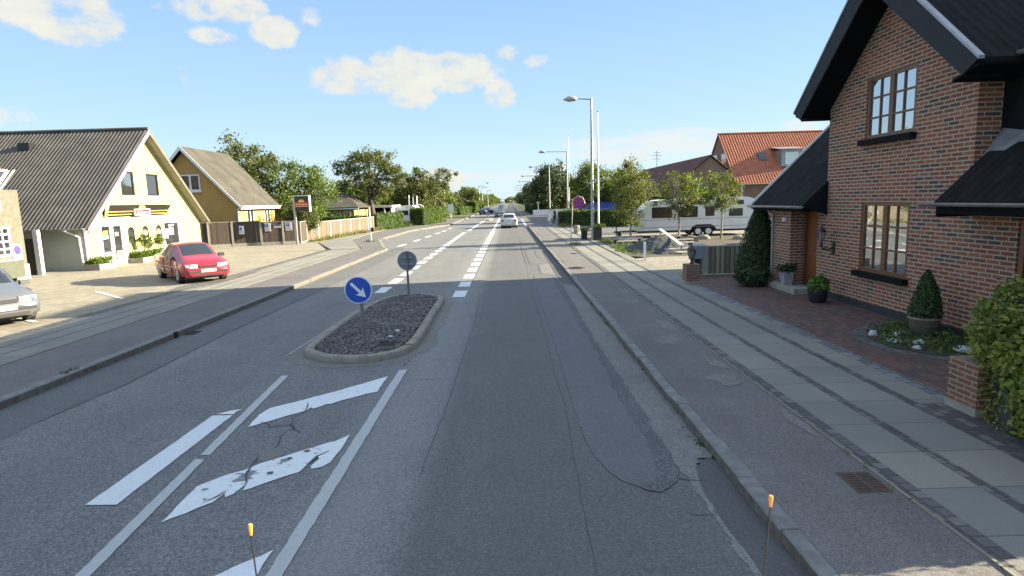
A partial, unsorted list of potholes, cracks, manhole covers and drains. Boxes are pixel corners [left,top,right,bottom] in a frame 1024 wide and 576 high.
crack [260,403,309,446]
crack [527,270,598,575]
drain grate [835,471,894,493]
crack [205,454,259,502]
